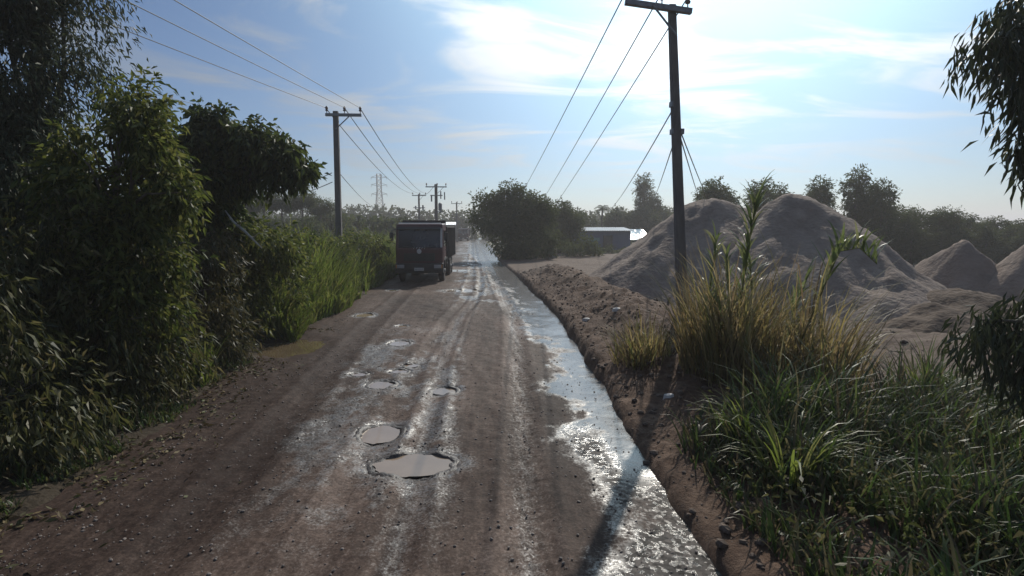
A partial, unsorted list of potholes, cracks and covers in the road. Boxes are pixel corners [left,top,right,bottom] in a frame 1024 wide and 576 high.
pothole [365,380,399,390]
pothole [354,424,407,447]
pothole [428,385,460,396]
pothole [366,449,460,481]
